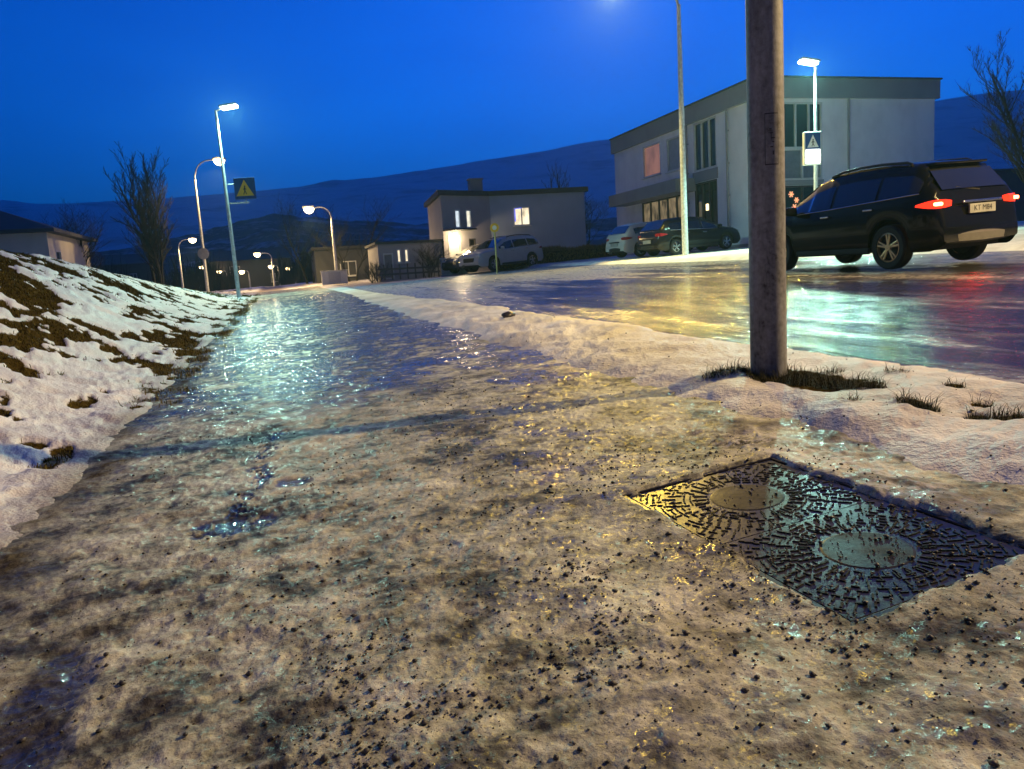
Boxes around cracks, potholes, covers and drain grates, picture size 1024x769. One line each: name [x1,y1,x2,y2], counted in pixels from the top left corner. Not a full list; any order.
manhole cover [623,457,1024,623]
